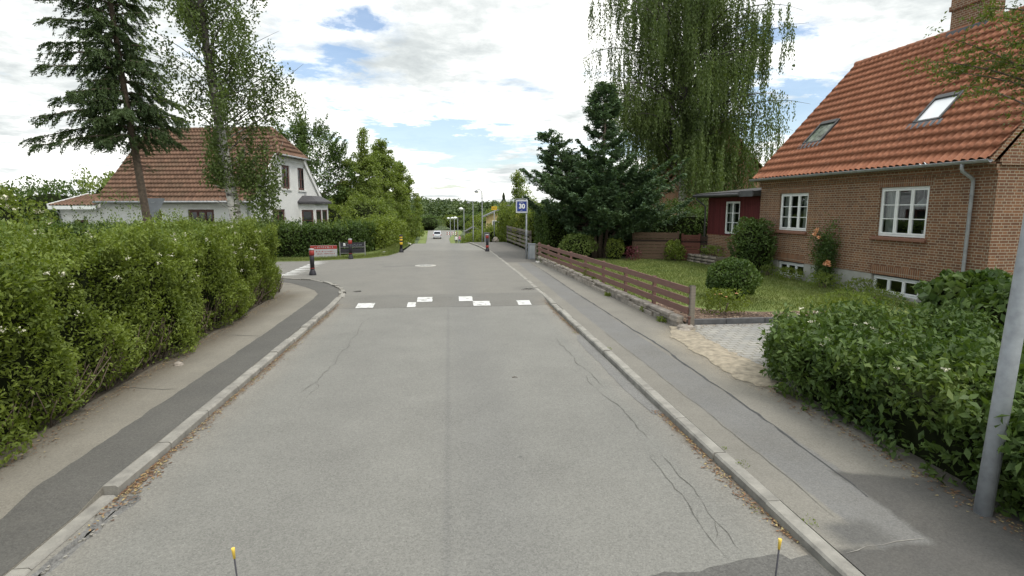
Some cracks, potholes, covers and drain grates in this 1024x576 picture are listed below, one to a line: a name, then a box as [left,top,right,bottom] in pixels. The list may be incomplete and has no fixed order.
crack [557,340,644,433]
